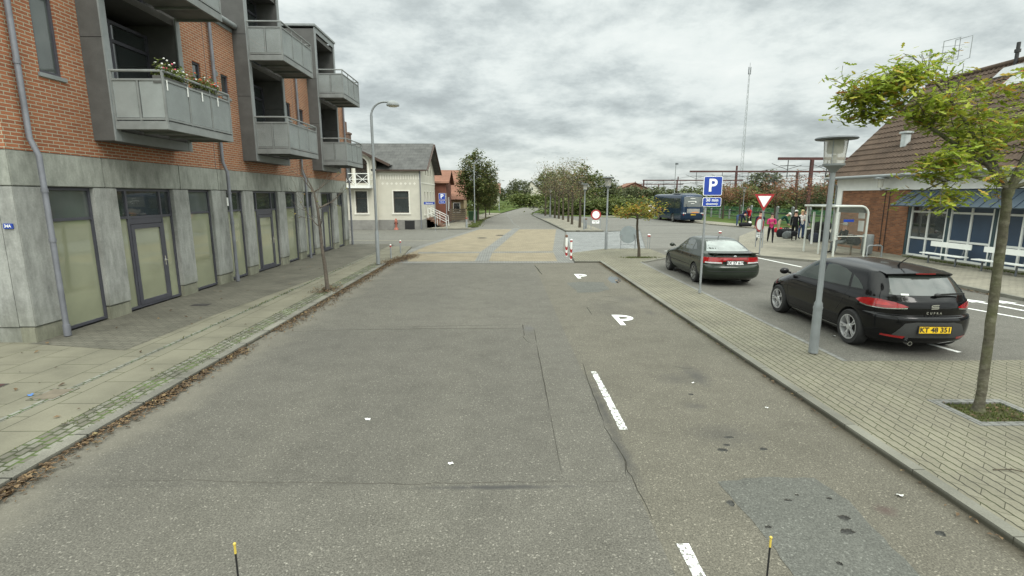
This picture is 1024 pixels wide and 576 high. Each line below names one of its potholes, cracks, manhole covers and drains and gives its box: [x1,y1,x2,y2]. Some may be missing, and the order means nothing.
crack [133,365,653,520]
